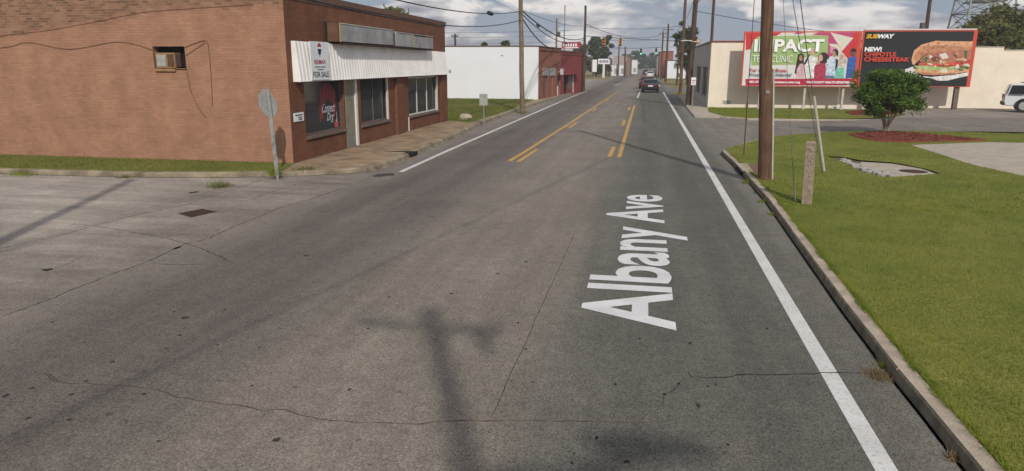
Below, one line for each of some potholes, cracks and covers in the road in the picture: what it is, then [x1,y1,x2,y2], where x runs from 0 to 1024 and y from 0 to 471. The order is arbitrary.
crack [34,372,871,425]
drain grate [178,209,217,217]
